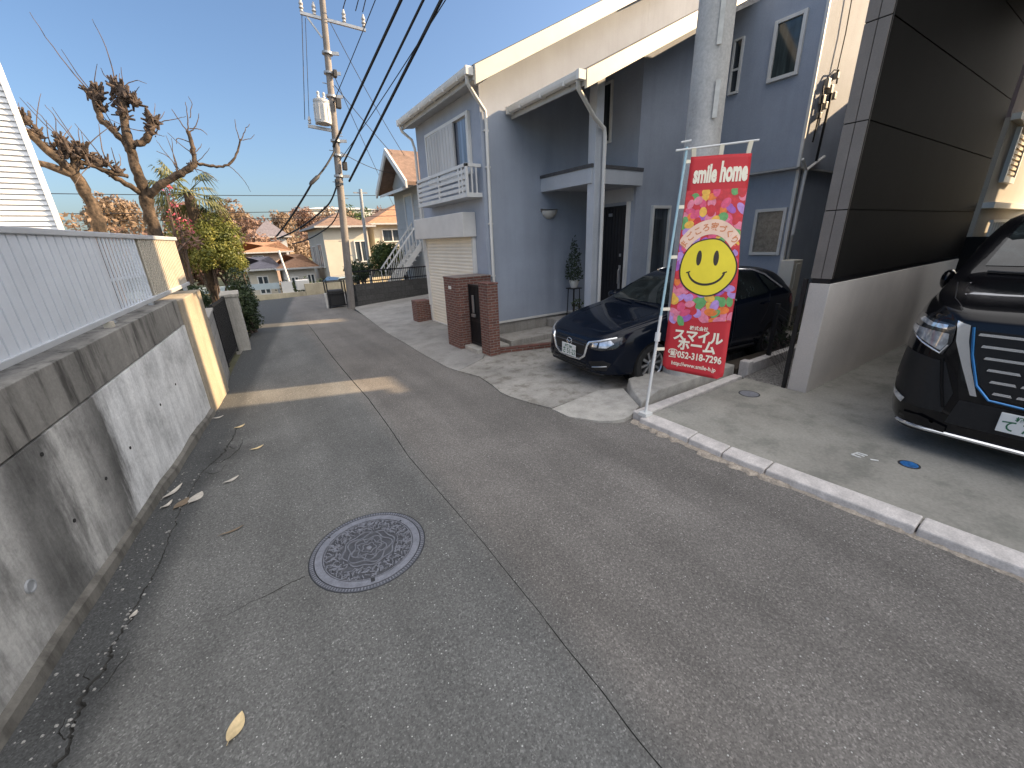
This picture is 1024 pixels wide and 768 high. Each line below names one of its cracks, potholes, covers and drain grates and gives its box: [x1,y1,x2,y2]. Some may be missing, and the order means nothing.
crack [51,423,243,768]
manhole cover [308,512,425,594]
